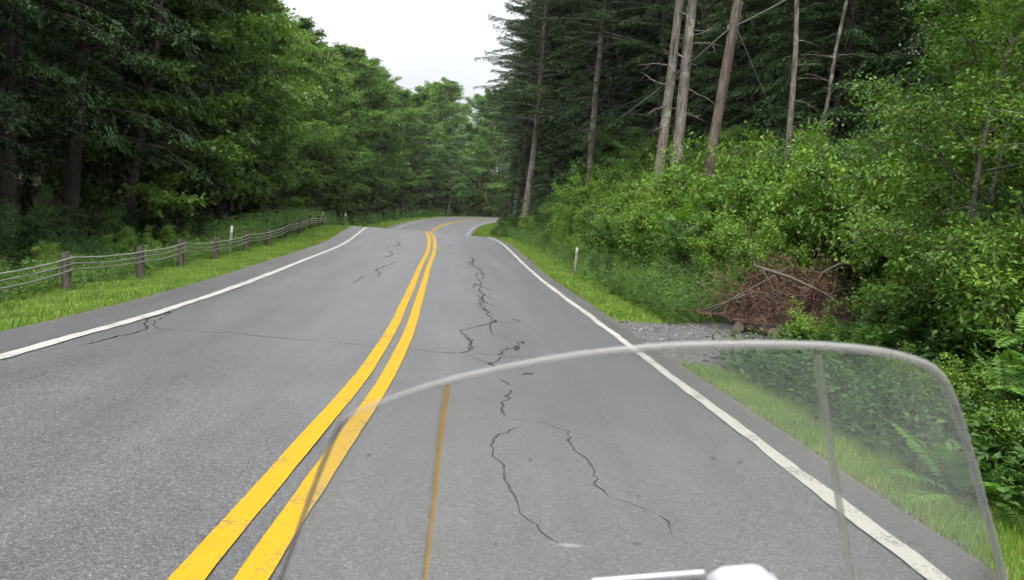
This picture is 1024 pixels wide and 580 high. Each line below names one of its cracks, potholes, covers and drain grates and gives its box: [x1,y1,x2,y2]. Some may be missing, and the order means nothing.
crack [440,253,672,543]
crack [89,309,433,352]
